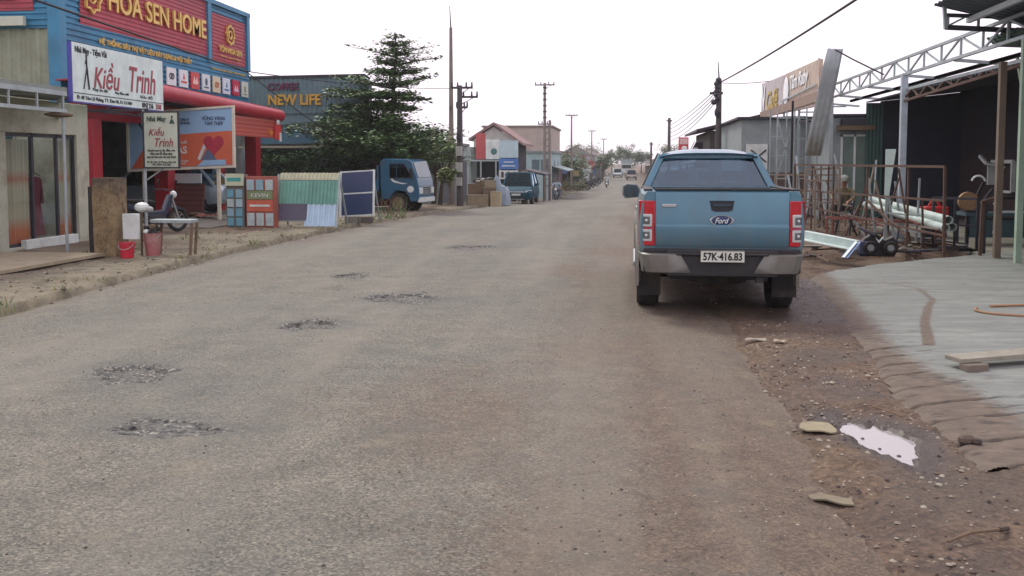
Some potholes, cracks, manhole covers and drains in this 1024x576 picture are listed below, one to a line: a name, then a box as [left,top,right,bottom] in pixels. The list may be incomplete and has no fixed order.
pothole [83,362,199,385]
pothole [349,291,450,305]
pothole [834,421,924,469]
pothole [107,417,234,439]
pothole [276,316,342,331]
